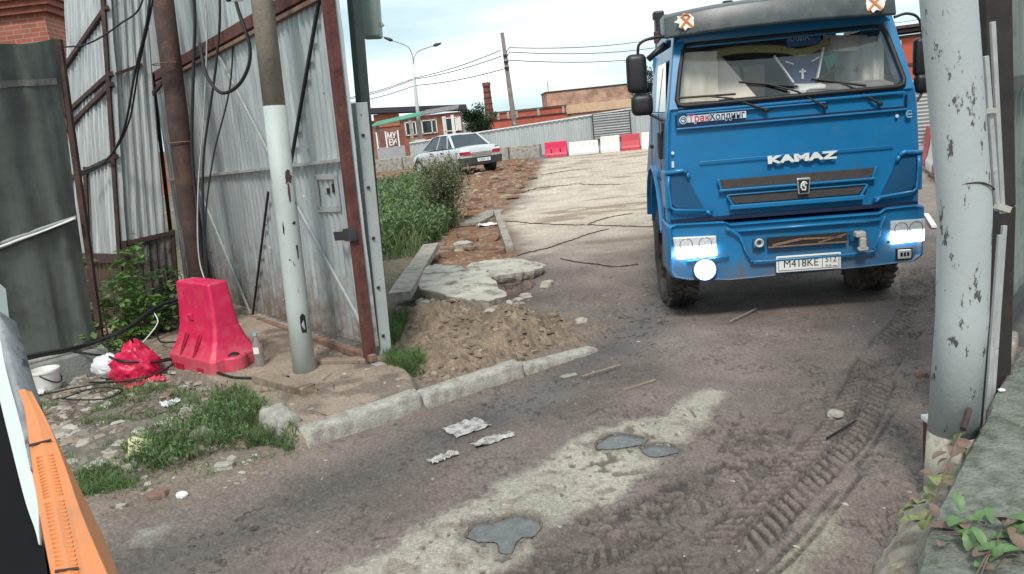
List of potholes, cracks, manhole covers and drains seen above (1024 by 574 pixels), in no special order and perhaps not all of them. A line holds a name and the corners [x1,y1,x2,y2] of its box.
crack [505,213,653,267]
